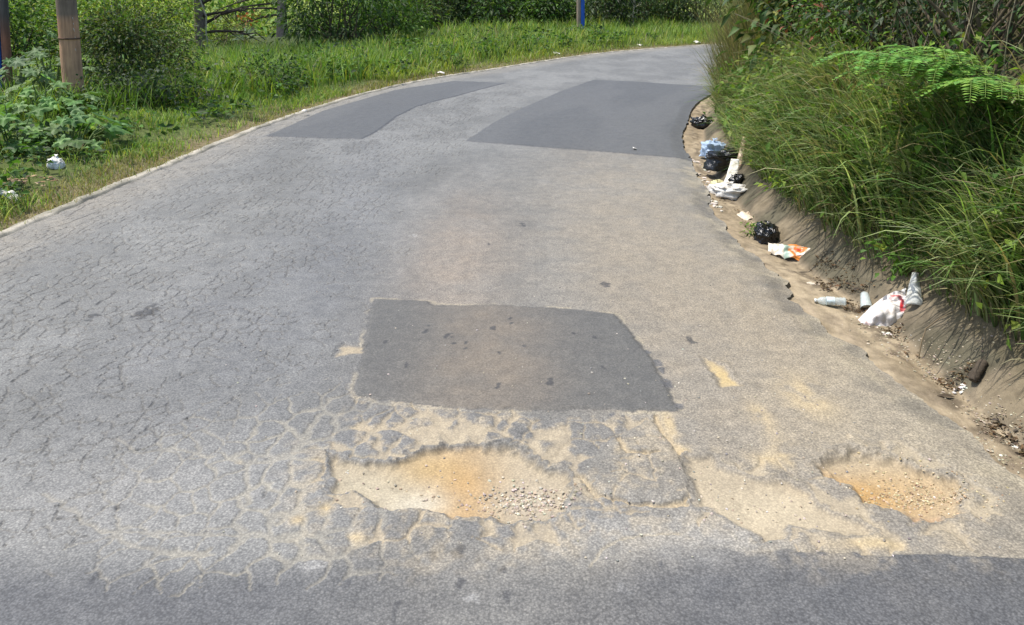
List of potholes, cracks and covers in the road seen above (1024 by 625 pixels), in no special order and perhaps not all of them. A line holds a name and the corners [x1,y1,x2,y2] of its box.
pothole [319,440,601,528]
pothole [802,443,1010,527]
crack [0,79,521,597]
